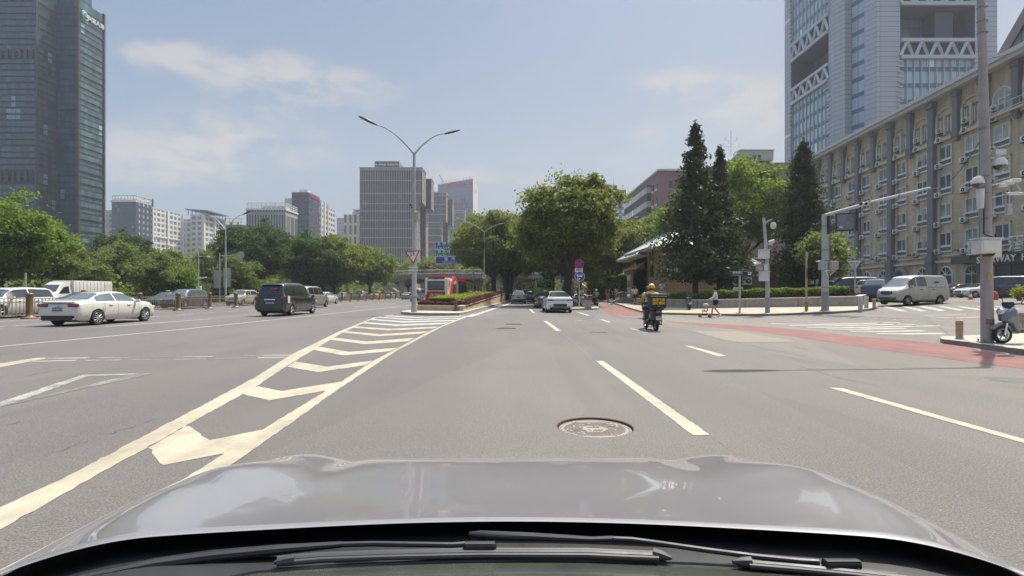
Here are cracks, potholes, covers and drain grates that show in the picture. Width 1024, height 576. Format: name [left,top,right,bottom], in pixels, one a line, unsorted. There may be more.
manhole cover [556,418,634,438]
